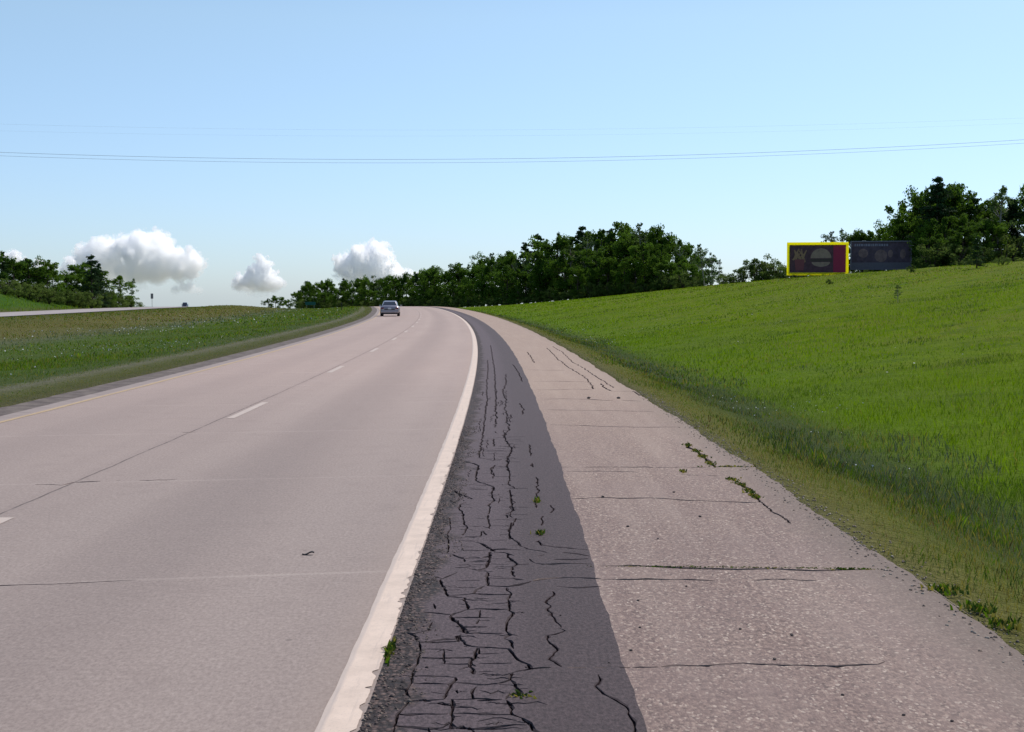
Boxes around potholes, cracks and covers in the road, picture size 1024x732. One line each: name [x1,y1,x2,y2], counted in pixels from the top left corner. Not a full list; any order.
crack [391,345,885,732]
